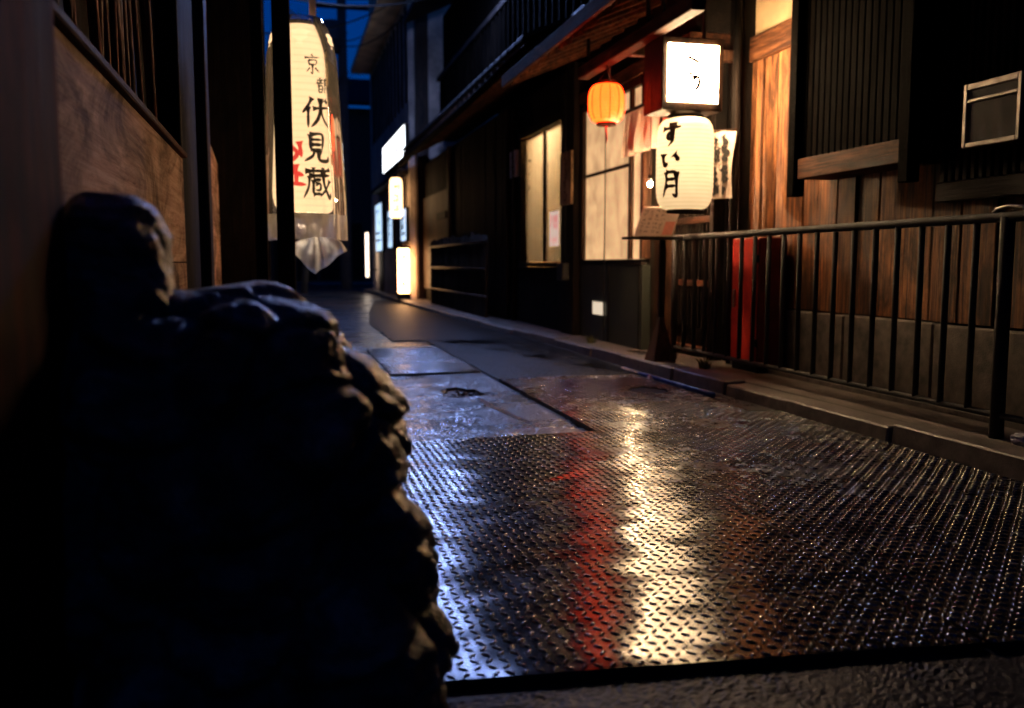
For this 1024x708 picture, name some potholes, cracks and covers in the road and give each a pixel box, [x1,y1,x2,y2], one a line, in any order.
pothole [441,387,486,398]
